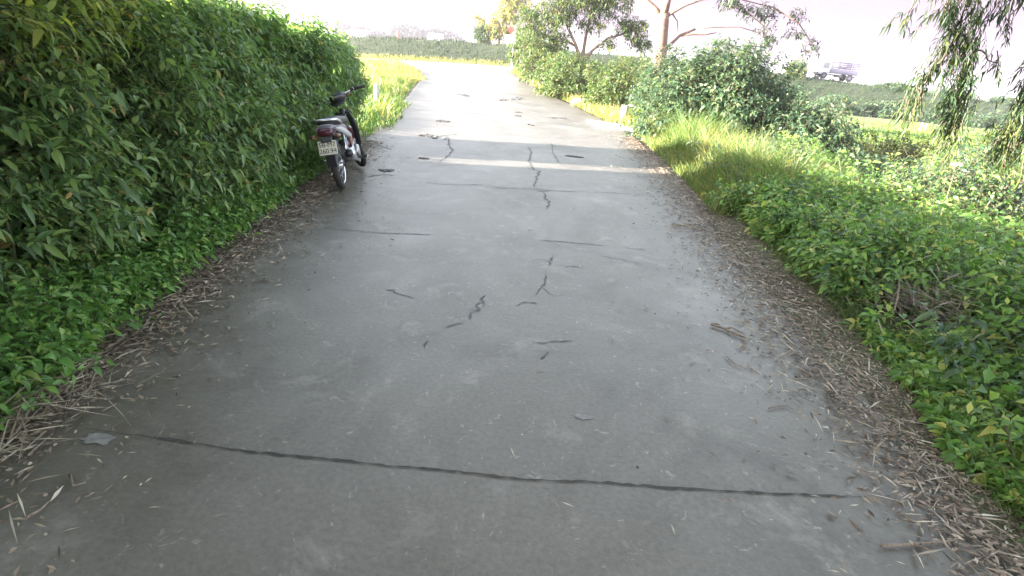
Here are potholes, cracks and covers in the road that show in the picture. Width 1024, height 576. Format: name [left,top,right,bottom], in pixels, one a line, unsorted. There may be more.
crack [446,295,485,327]
crack [520,143,563,209]
crack [516,241,578,306]
crack [434,134,457,161]
